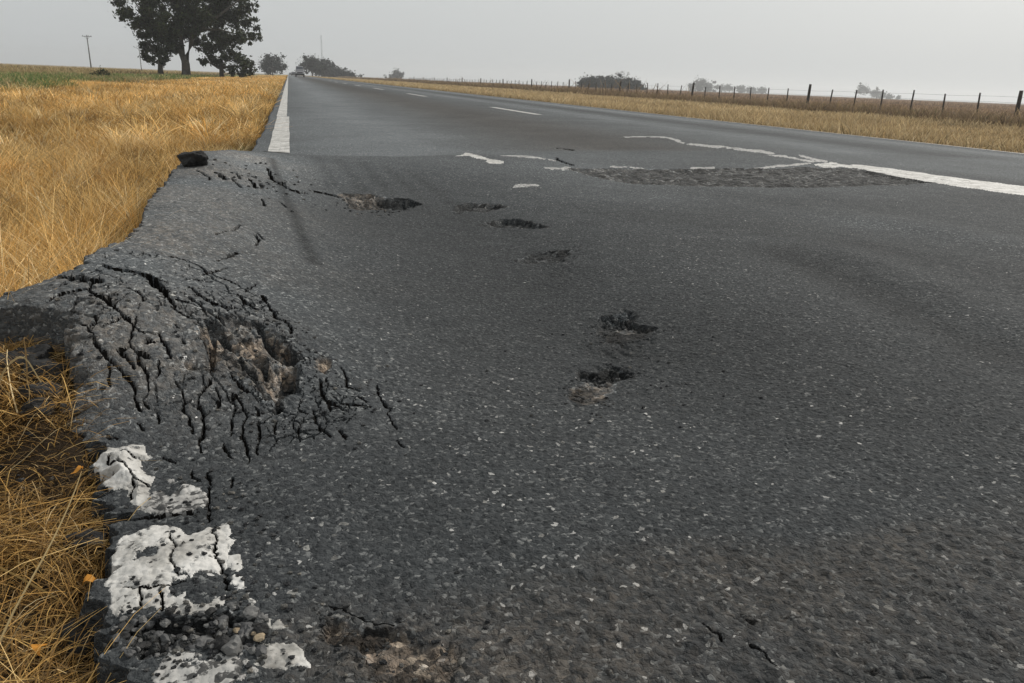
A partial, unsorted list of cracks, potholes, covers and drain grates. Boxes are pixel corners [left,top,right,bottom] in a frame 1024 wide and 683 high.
pothole [511,246,583,265]
crack [749,644,777,666]
pothole [567,365,644,406]
pothole [452,202,509,214]
pothole [194,312,304,417]
pothole [477,218,552,230]
pothole [592,311,666,347]
